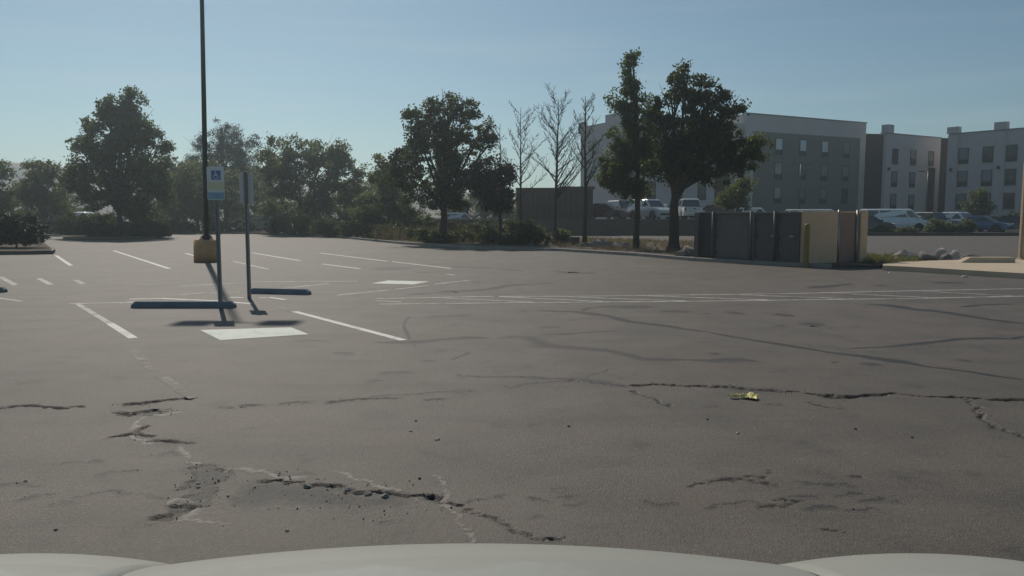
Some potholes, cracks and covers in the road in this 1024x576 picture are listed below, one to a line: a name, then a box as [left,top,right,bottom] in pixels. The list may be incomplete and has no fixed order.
crack [638,469,904,510]
crack [215,266,1024,439]
crack [0,404,200,507]
crack [116,397,196,407]
